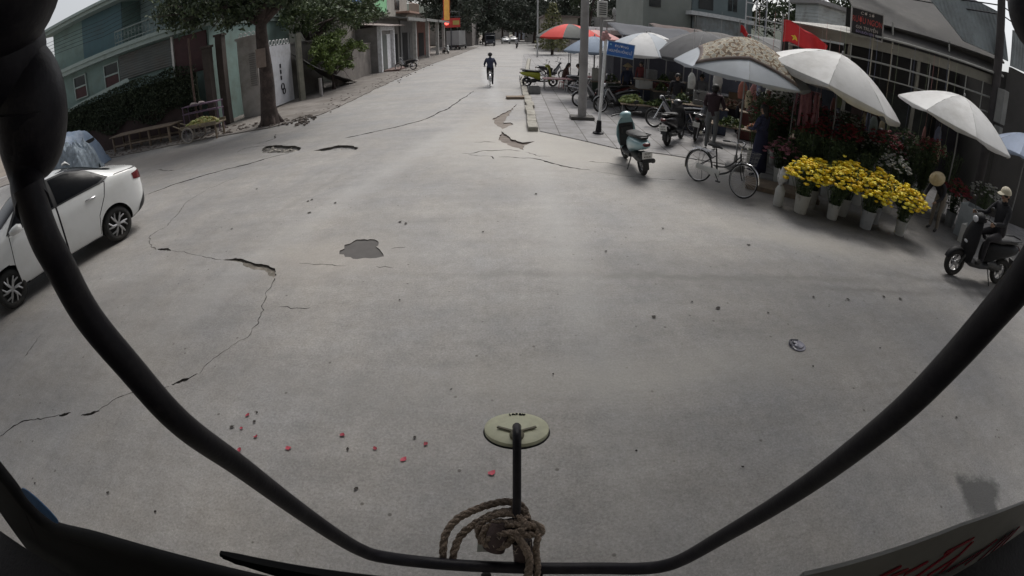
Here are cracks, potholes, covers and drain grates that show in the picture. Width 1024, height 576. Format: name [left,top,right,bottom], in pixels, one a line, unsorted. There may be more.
pothole [493,106,515,129]
pothole [499,132,534,150]
pothole [262,145,301,153]
crack [1,278,307,436]
pothole [339,239,384,259]
crack [468,142,671,180]
